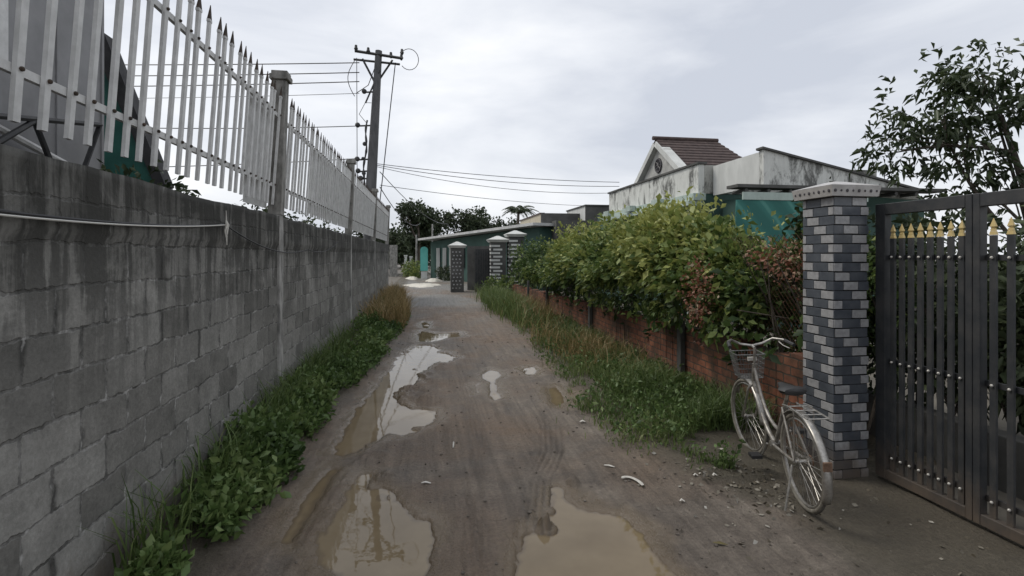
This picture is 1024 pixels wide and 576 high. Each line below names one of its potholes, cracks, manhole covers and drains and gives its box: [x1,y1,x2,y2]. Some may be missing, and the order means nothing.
pothole [296,469,446,576]
pothole [412,329,465,343]
pothole [503,481,691,576]
pothole [324,343,460,458]
